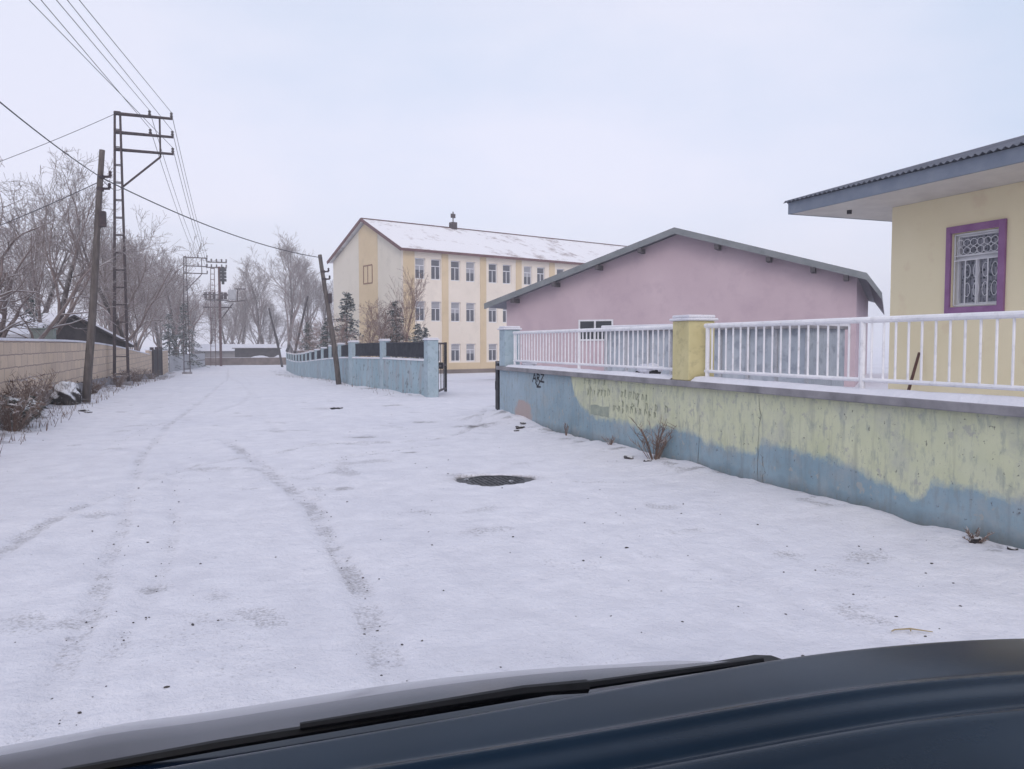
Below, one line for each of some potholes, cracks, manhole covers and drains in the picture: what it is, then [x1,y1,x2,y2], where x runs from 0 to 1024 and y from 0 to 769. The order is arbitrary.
manhole cover [456,475,534,487]
